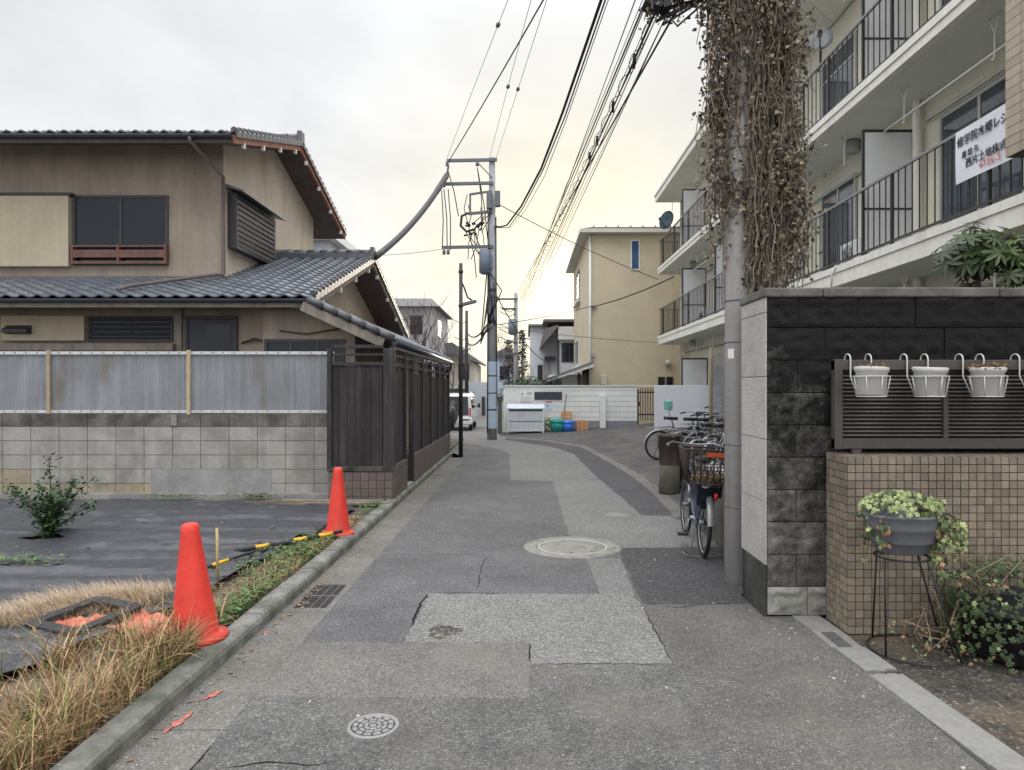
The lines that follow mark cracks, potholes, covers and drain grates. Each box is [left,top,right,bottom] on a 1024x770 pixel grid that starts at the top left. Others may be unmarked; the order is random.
manhole cover [346,713,400,739]
crack [560,603,732,665]
drain grate [289,584,349,609]
manhole cover [524,536,622,559]
pothole [428,624,463,640]
crack [411,594,427,626]
